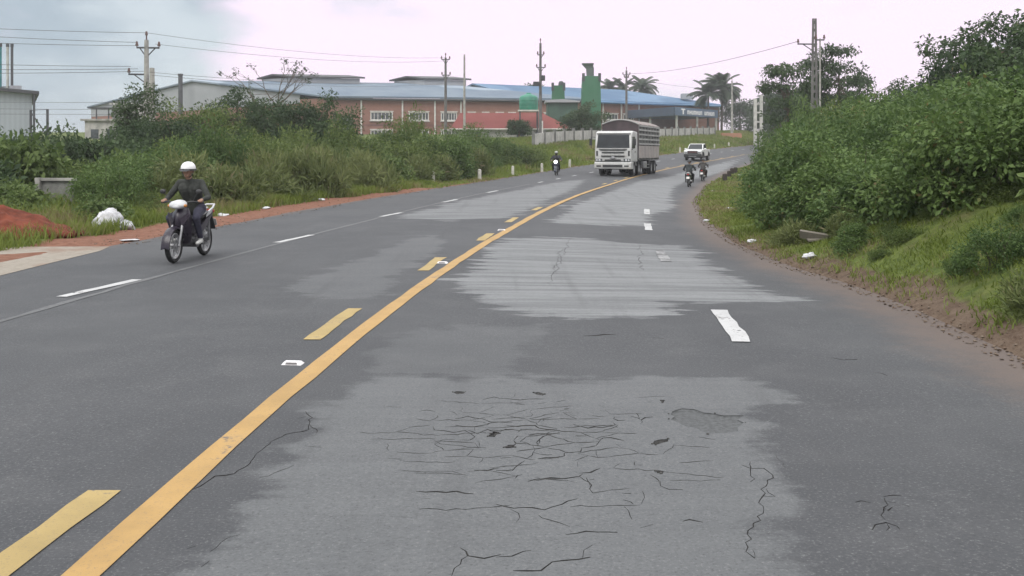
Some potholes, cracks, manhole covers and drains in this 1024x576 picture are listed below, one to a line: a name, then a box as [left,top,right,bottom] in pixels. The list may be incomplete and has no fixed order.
crack [452,519,701,574]
crack [188,412,391,567]
crack [362,396,785,527]
crack [742,464,776,559]
pothole [668,409,746,435]
